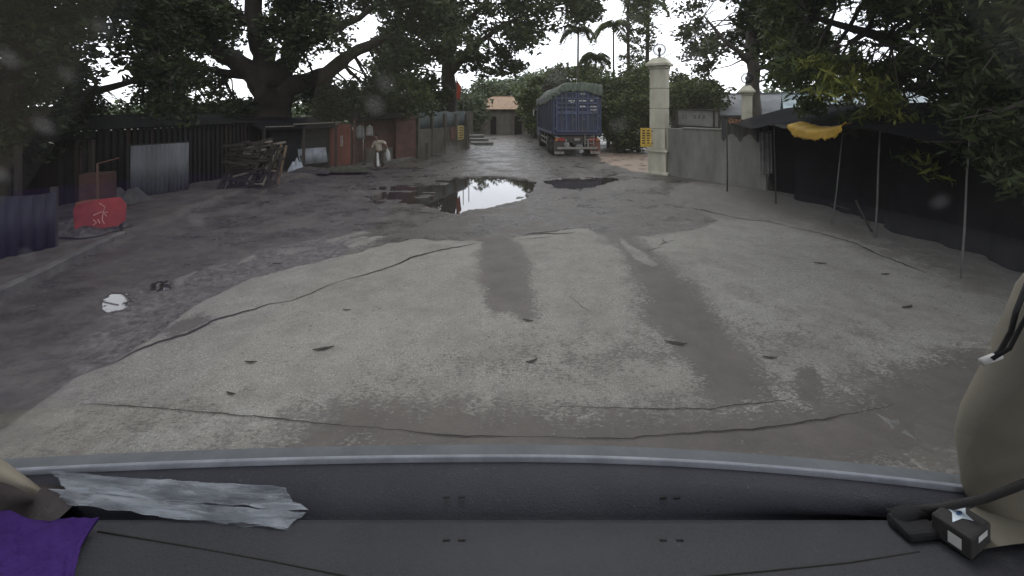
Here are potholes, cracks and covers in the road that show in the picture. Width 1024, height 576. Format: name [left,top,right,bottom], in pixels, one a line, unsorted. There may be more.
pothole [345,175,544,217]
crack [102,398,893,439]
crack [88,242,480,372]
pothole [534,177,622,190]
